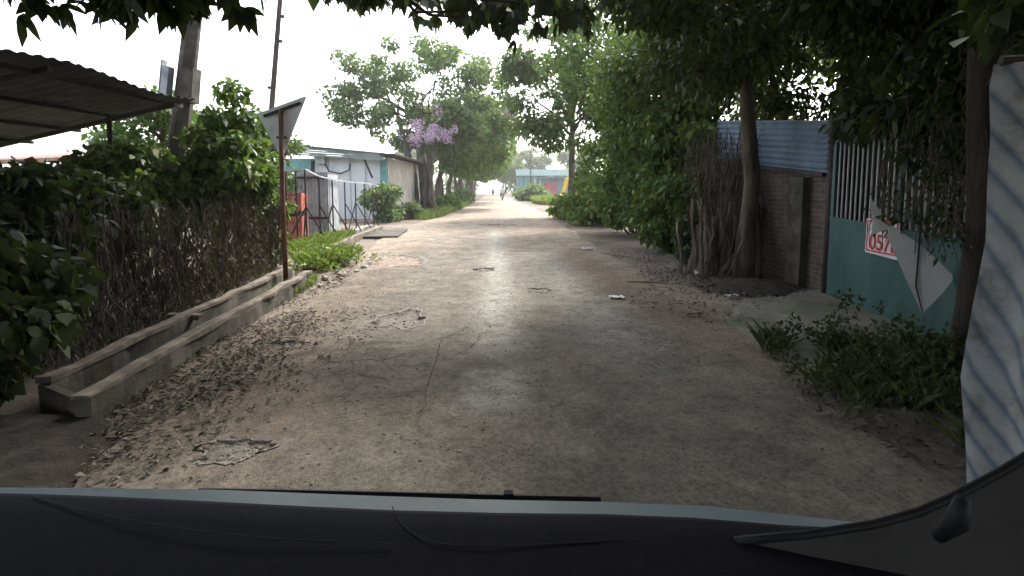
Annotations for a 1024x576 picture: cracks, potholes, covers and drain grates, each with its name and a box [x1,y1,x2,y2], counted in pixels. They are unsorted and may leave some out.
pothole [362,307,429,330]
pothole [196,437,281,465]
crack [303,315,496,440]
